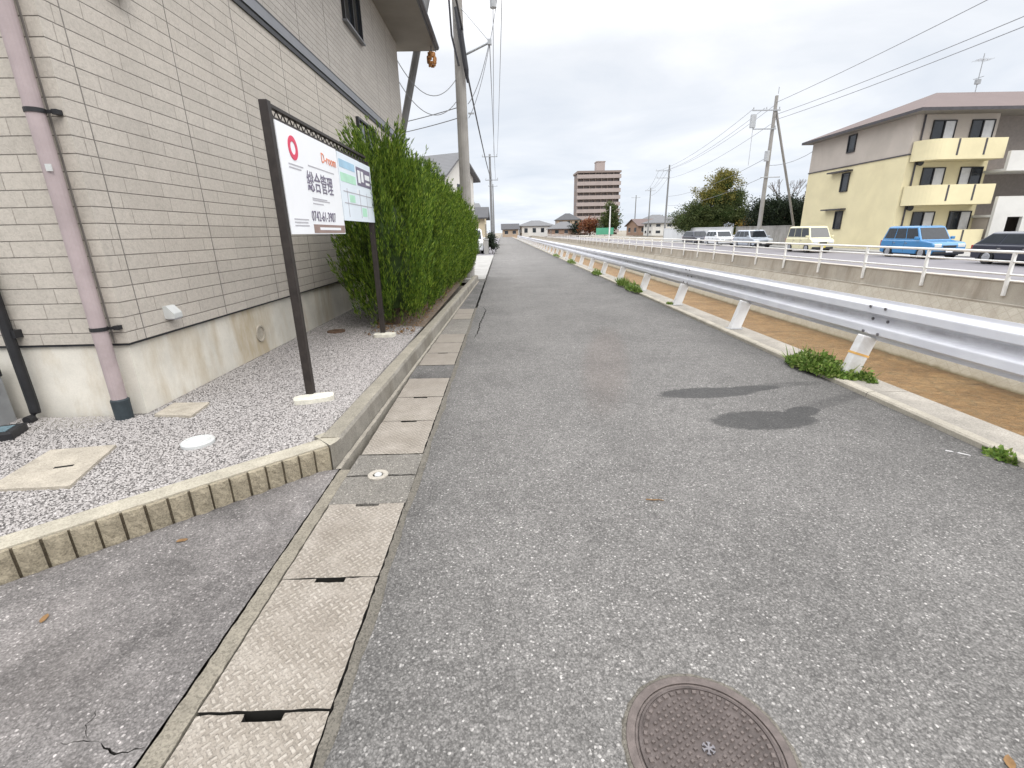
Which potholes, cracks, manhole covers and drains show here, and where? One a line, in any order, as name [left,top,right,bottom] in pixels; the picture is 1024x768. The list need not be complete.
crack [60,708,147,756]
manhole cover [621,673,803,768]
